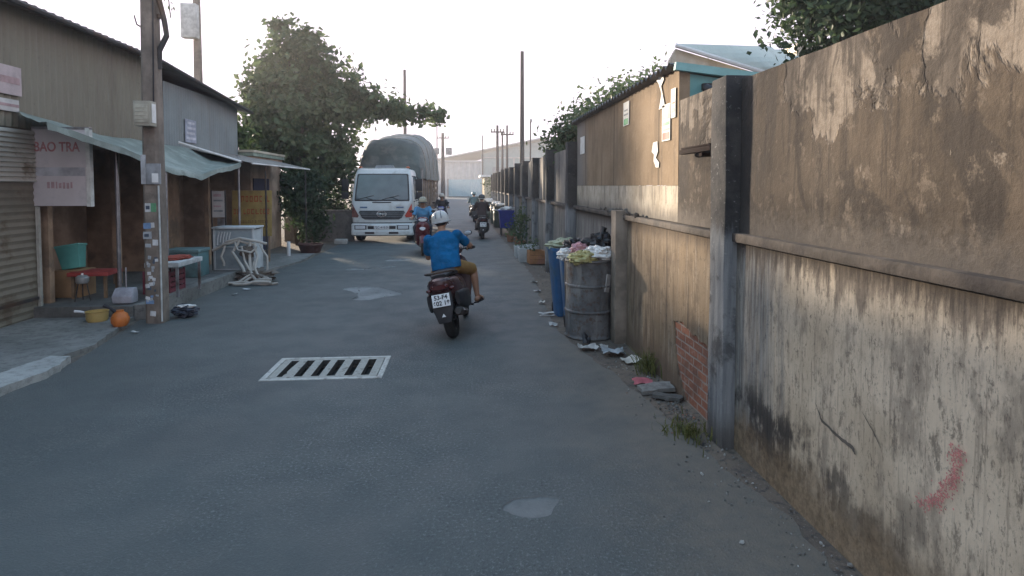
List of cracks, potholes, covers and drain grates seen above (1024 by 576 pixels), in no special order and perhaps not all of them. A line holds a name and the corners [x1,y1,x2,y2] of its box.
drain grate [258,356,391,381]
